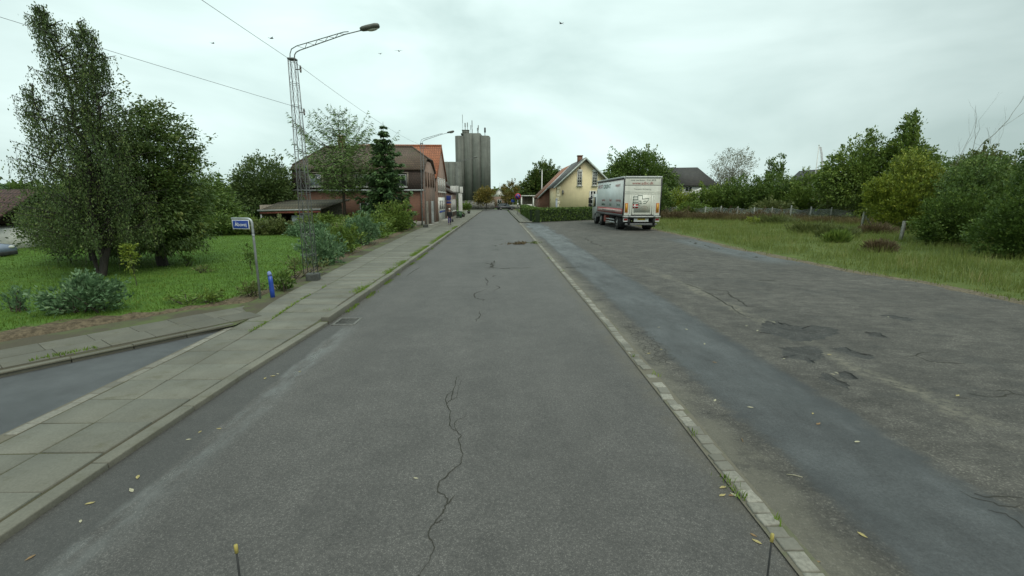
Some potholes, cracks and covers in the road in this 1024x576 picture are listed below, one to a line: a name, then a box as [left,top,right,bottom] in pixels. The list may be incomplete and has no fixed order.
pothole [778,346,825,363]
crack [418,377,464,576]
pothole [818,373,850,389]
pothole [831,347,876,359]
crack [474,234,529,321]
crack [684,271,765,318]
pothole [759,321,840,342]
crack [968,493,1024,528]
